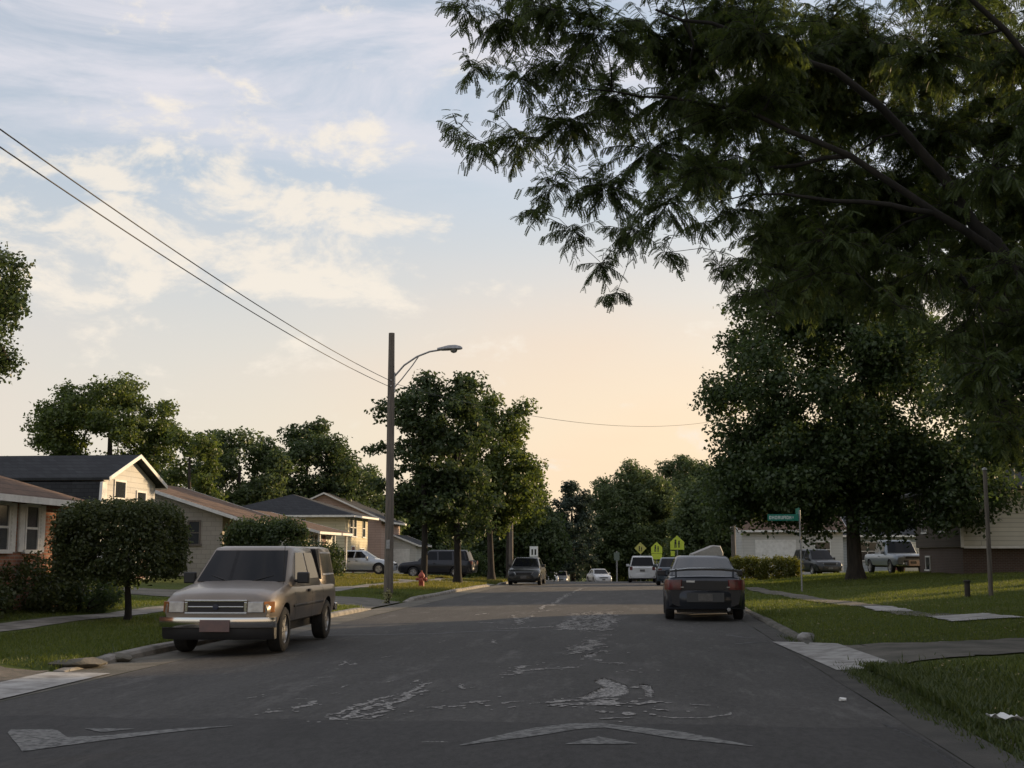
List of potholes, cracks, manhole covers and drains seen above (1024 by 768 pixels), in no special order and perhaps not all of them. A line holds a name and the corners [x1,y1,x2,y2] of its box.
pothole [638,684,654,697]
pothole [584,678,629,697]
